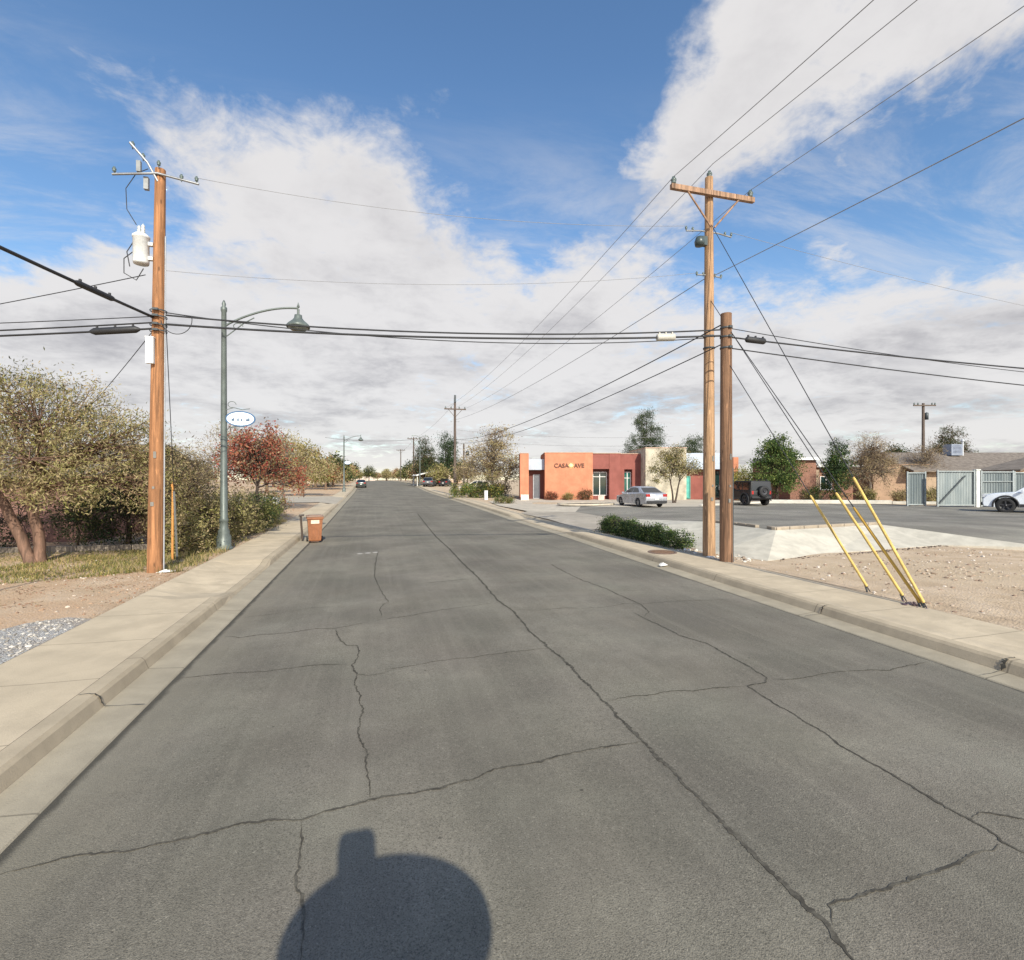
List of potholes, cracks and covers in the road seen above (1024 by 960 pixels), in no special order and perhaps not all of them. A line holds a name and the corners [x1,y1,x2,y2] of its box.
crack [2,514,1024,960]
